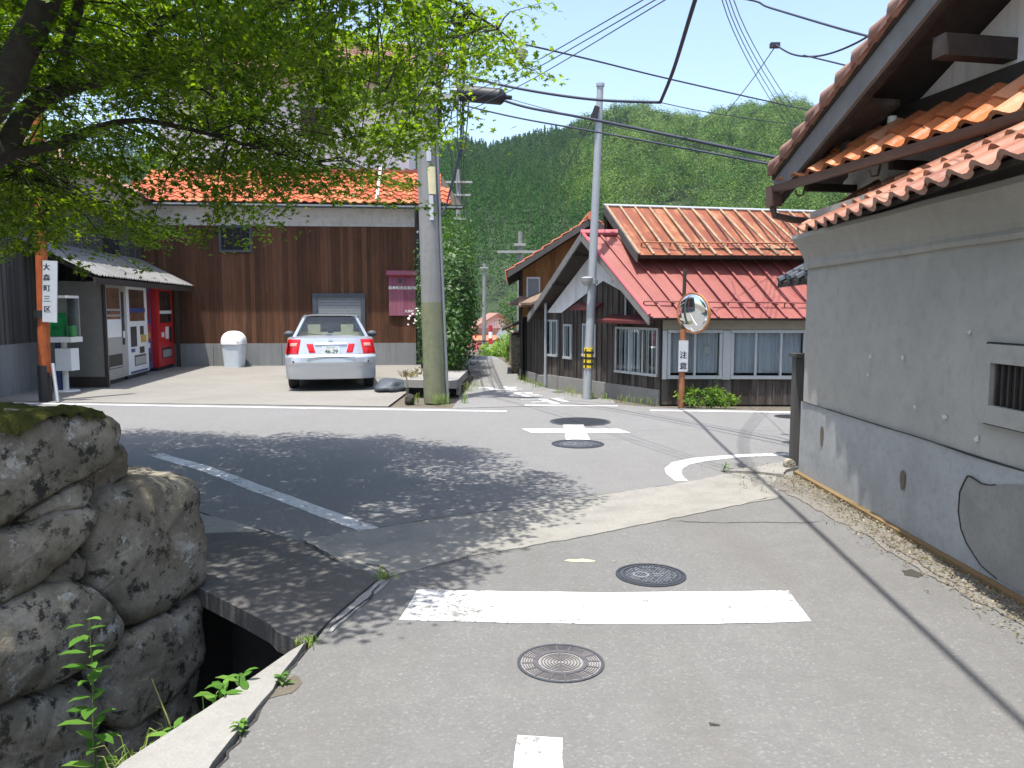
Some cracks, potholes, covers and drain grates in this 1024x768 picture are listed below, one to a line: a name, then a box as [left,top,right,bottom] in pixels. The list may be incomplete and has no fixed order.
manhole cover [550,417,611,426]
manhole cover [552,439,604,449]
manhole cover [517,644,605,683]
manhole cover [616,563,686,587]
